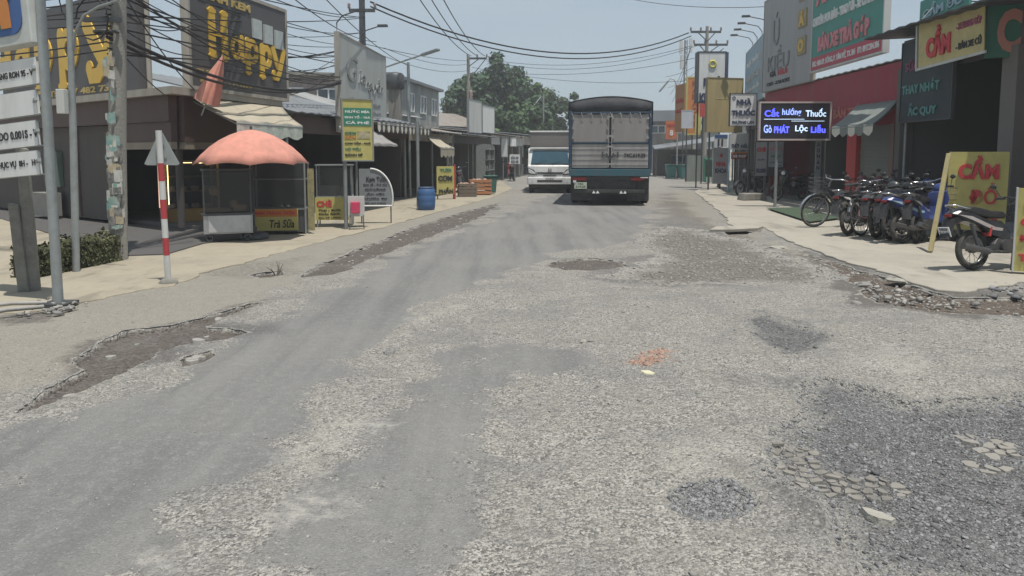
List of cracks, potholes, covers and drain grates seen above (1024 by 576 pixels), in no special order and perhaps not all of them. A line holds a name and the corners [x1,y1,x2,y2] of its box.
pothole [296,202,504,278]
pothole [794,247,1024,317]
pothole [744,375,1024,576]
pothole [3,300,267,420]
